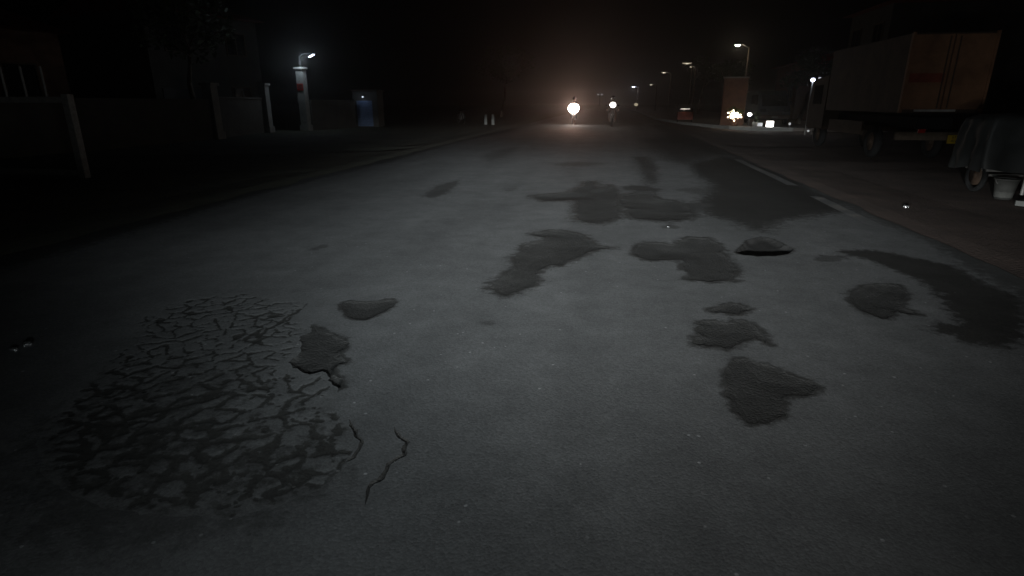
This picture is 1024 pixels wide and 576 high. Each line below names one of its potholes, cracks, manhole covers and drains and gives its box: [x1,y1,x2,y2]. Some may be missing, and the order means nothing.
pothole [708,303,752,314]
pothole [735,237,794,256]
pothole [489,230,612,296]
crack [35,292,410,520]
pothole [633,237,738,282]
pothole [723,358,818,424]
pothole [288,326,350,389]
pothole [692,320,769,349]
pothole [535,181,619,223]
pothole [341,299,397,320]
pothole [849,284,917,319]
